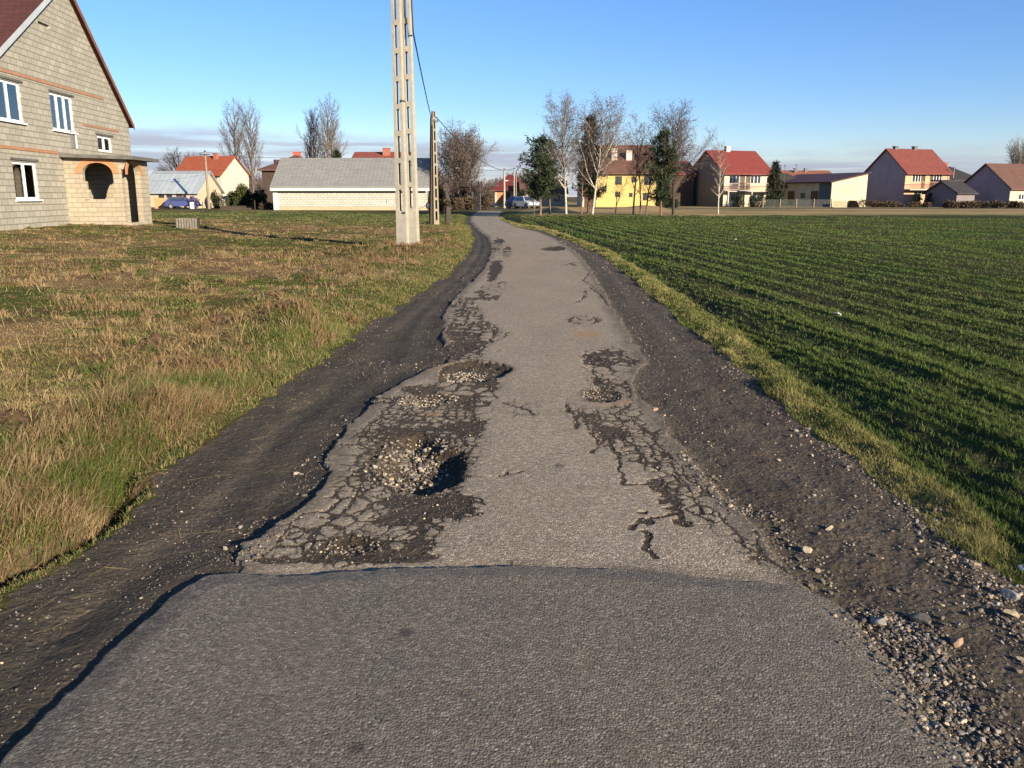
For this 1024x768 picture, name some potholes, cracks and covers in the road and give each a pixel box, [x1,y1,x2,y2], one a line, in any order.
pothole [436,359,513,384]
crack [254,377,536,567]
pothole [366,432,469,497]
crack [443,238,513,361]
pothole [584,390,623,403]
crack [565,347,787,572]
